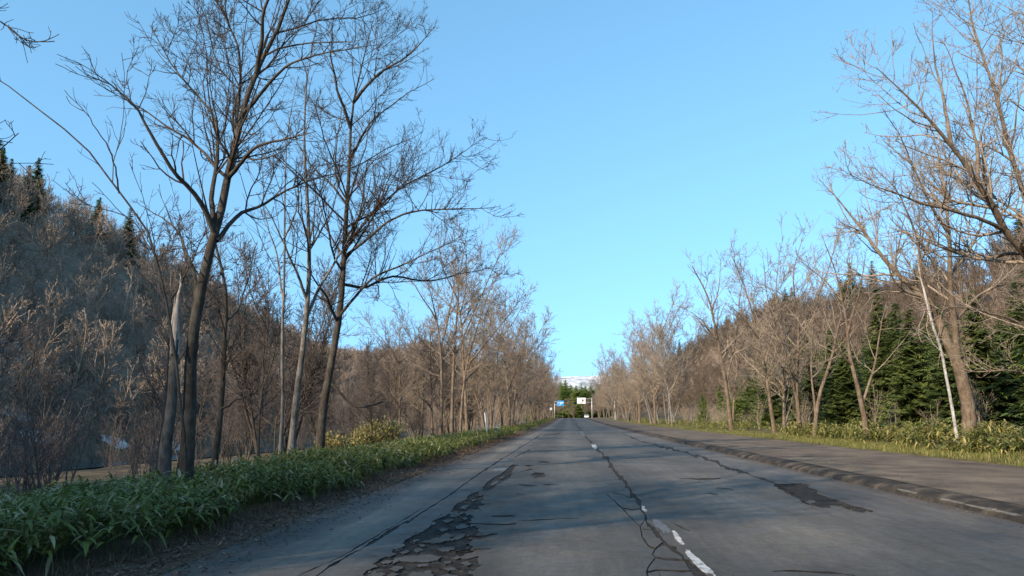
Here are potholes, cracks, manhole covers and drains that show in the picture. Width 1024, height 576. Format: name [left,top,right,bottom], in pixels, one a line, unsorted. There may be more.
pothole [774,483,874,513]
pothole [482,464,517,492]
pothole [451,492,489,513]
crack [298,424,792,576]
pothole [362,513,481,576]
